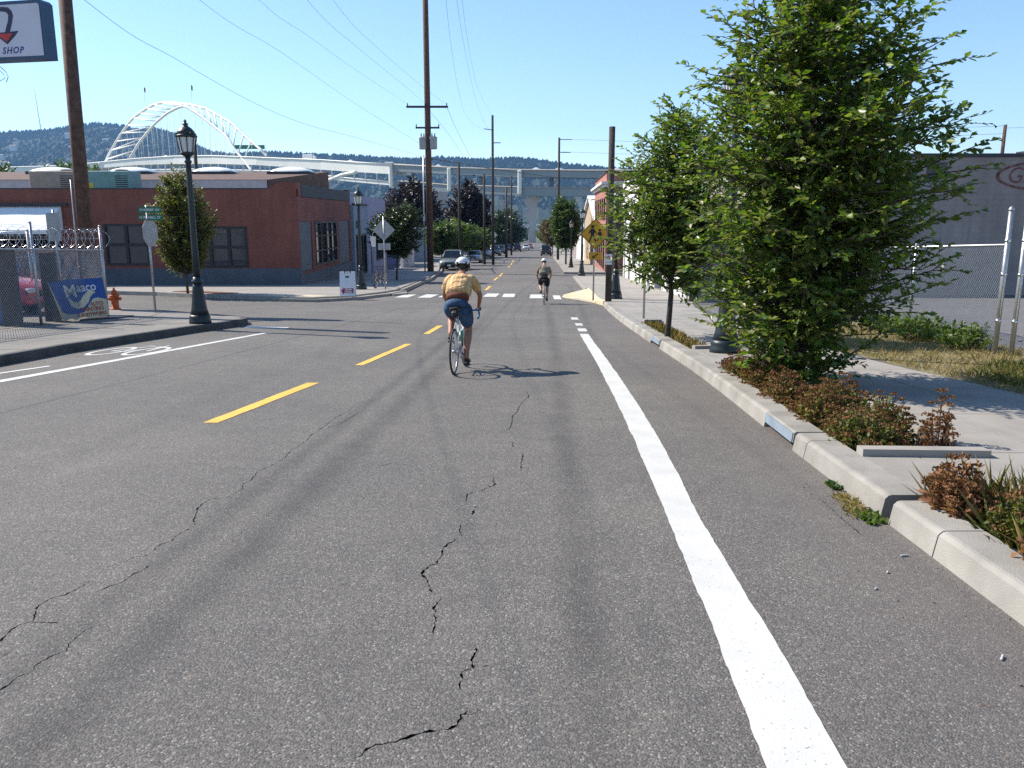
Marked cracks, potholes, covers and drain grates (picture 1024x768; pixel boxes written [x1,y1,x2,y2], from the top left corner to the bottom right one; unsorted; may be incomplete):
crack [355,648,490,758]
crack [0,402,358,690]
crack [420,393,529,634]
